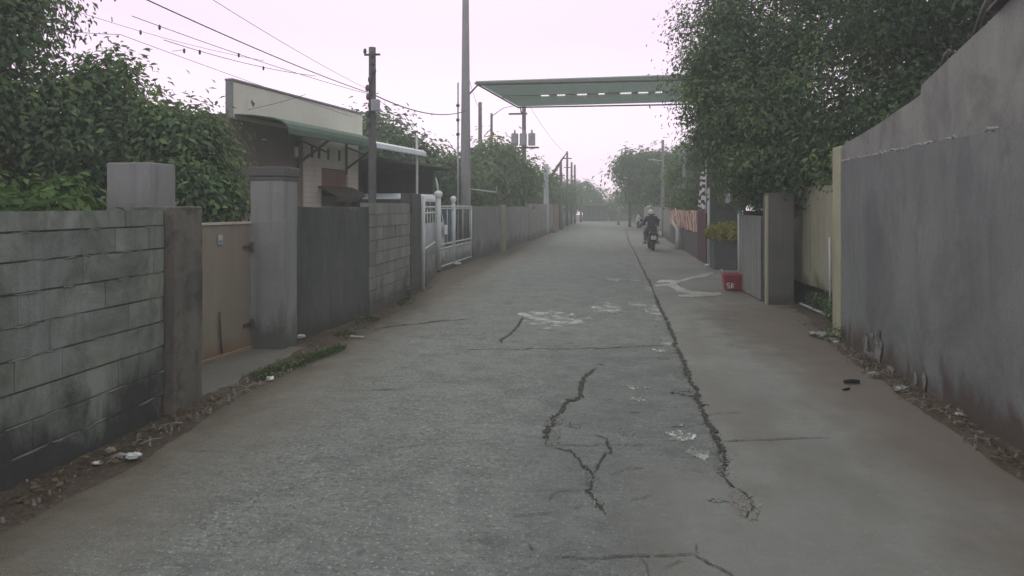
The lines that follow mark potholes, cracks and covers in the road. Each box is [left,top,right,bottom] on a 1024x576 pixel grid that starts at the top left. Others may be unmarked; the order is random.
crack [499,316,525,343]
crack [512,232,762,517]
pothole [729,489,760,521]
